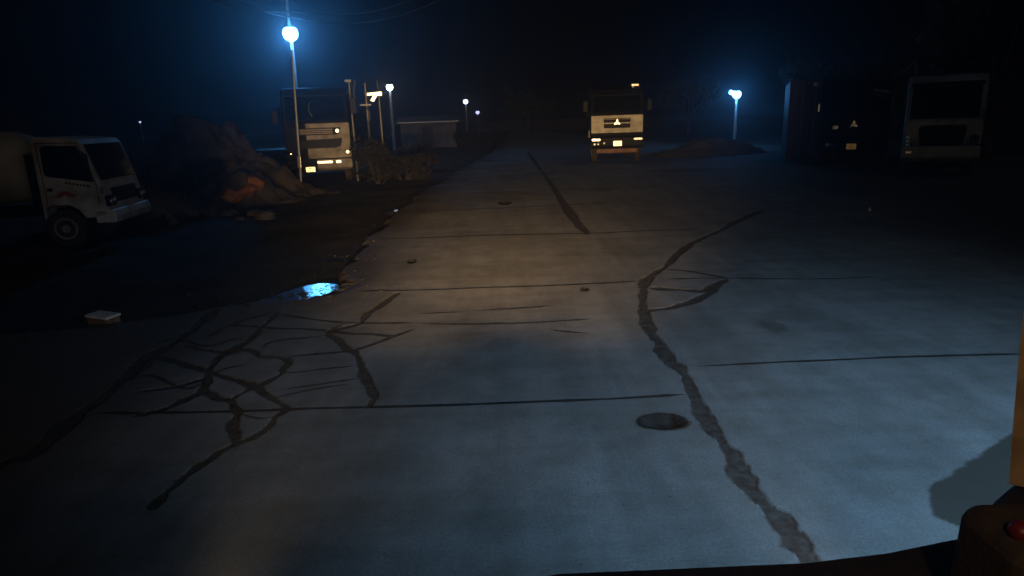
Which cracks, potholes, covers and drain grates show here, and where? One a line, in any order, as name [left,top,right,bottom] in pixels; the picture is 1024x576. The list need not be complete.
crack [0,293,587,511]
crack [527,152,591,234]
crack [638,211,820,563]
